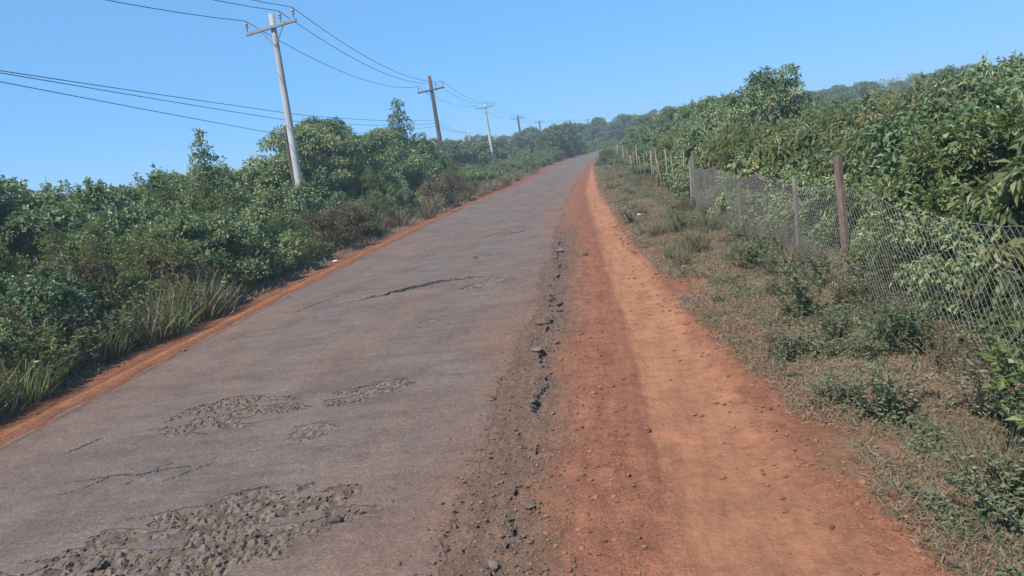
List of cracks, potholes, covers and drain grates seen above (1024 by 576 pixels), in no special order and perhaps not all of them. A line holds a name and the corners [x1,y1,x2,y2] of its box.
pothole [0,482,384,576]
crack [57,463,212,496]
pothole [151,395,313,437]
pothole [286,422,339,442]
pothole [323,377,416,407]
crack [296,277,484,312]
pothole [460,277,514,290]
